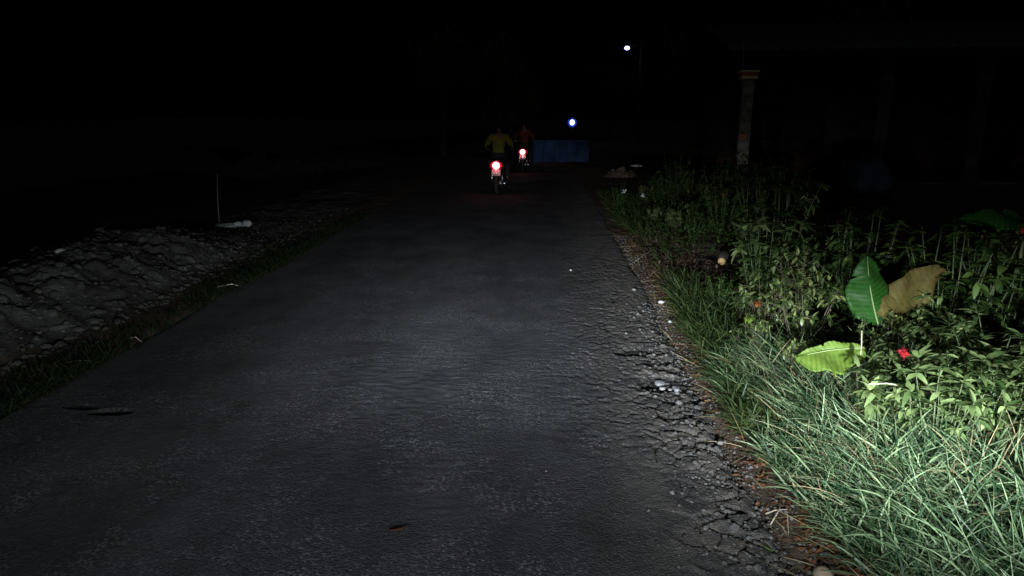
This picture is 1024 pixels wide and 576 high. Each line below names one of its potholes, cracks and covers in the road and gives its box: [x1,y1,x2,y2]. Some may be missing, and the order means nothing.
pothole [63,404,133,416]
pothole [635,375,694,394]
crack [653,354,751,525]
